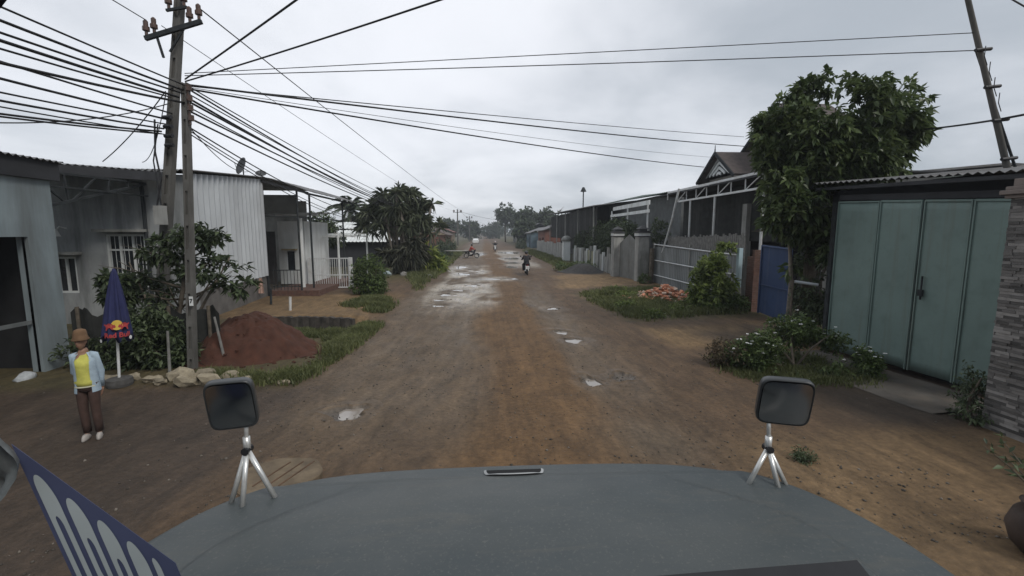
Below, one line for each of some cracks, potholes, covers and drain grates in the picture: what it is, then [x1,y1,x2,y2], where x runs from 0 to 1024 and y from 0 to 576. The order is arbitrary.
pothole [596,368,647,385]
pothole [551,335,597,347]
pothole [537,327,580,339]
pothole [568,371,620,391]
